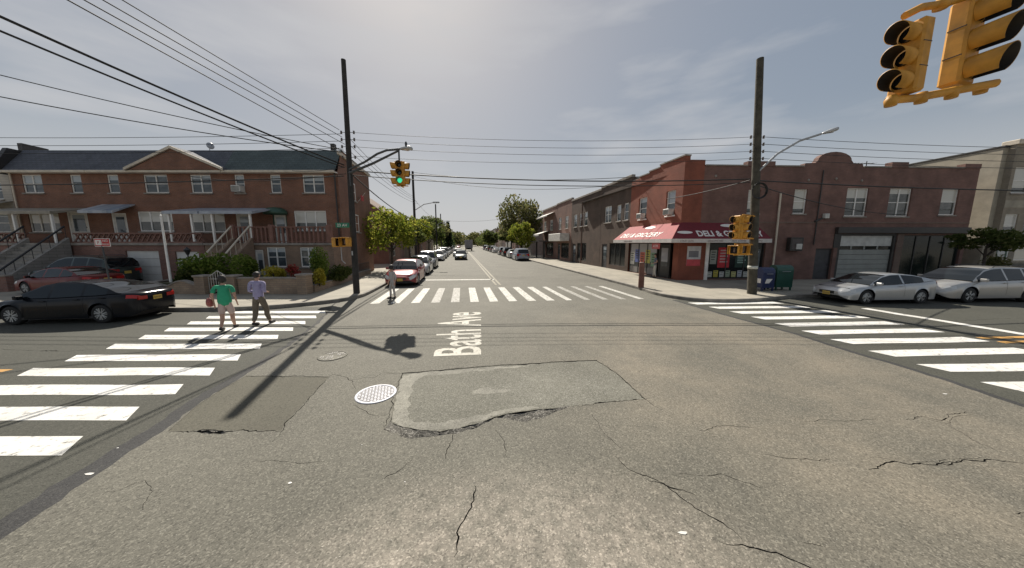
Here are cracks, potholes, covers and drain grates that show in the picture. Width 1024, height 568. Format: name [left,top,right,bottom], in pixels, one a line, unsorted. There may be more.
crack [593,417,823,568]
crack [454,486,476,557]
pothole [384,406,570,439]
manhole cover [354,384,397,404]
crack [912,412,1000,452]
manhole cover [317,351,348,361]
